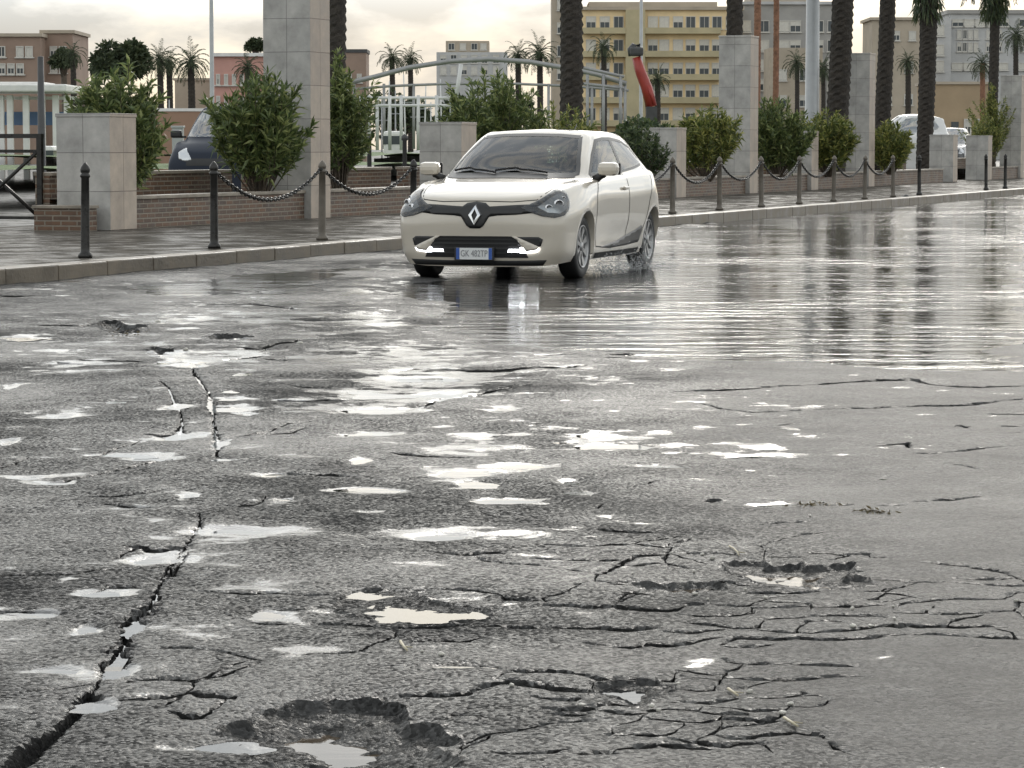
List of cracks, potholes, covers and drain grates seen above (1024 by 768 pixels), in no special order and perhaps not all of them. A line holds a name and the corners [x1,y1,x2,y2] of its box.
pothole [97,320,147,335]
crack [686,379,1024,433]
pothole [150,346,175,357]
pothole [211,696,464,768]
crack [0,513,1024,768]
pothole [720,560,873,590]
crack [63,369,329,508]
